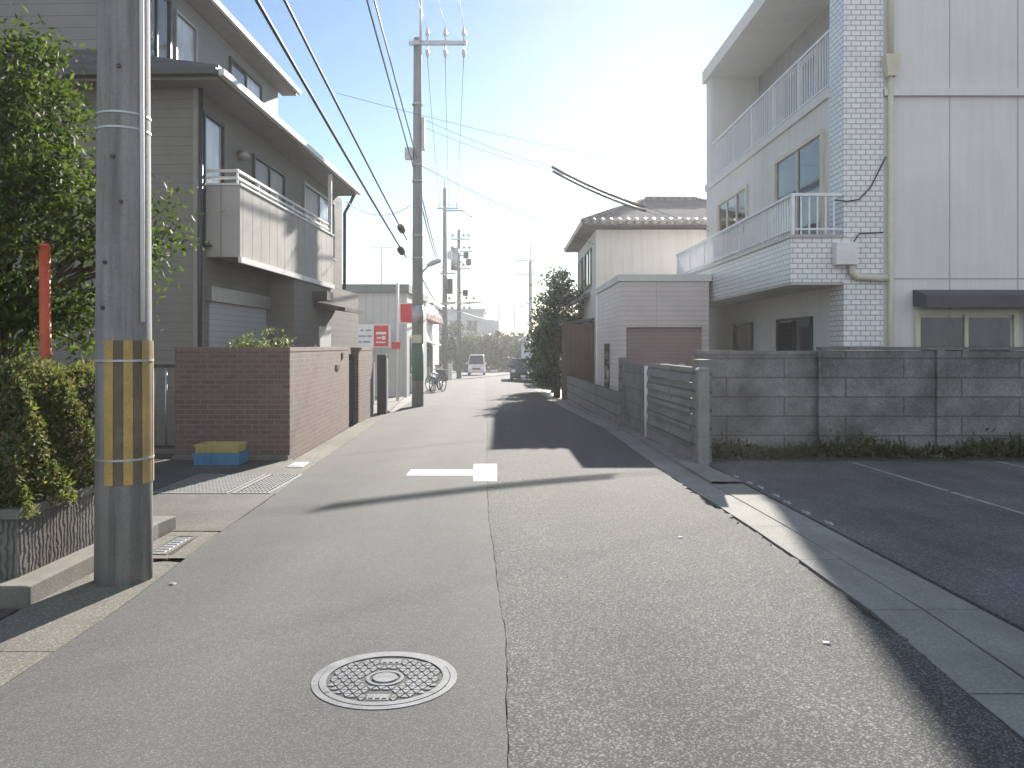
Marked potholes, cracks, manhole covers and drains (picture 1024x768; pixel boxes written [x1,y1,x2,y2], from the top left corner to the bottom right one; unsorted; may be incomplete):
manhole cover [311,651,457,710]
drain grate [231,474,303,494]
